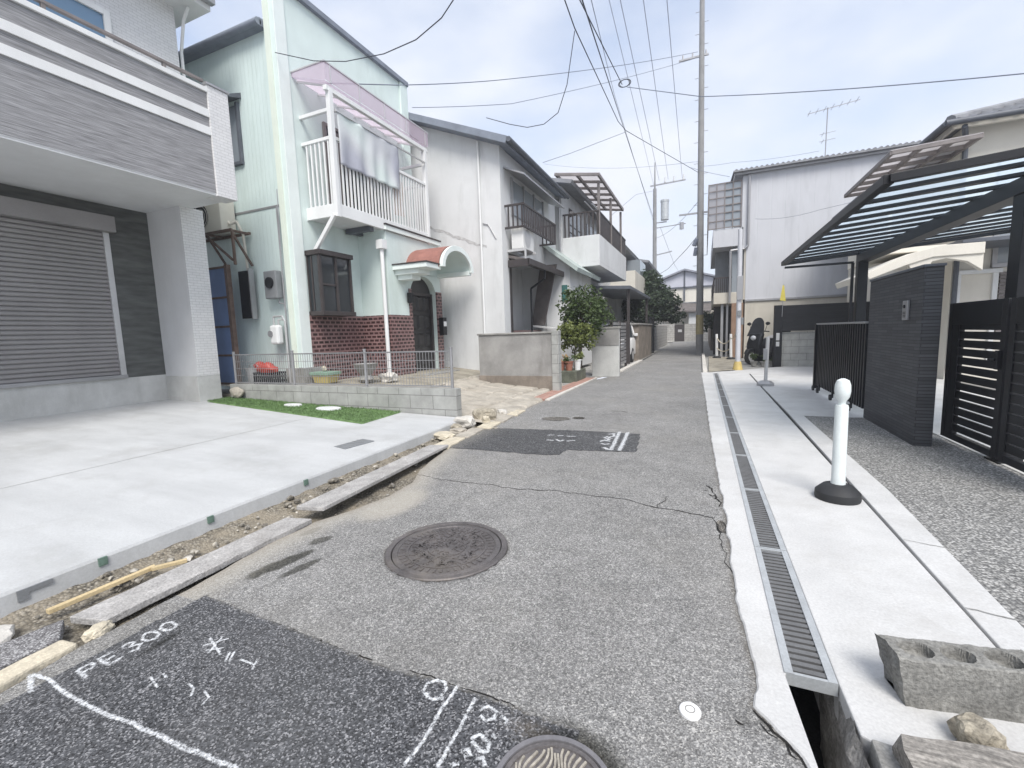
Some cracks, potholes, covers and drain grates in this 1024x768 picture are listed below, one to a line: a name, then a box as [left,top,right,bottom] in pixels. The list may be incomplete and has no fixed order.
manhole cover [384,522,508,582]
drain grate [721,405,735,417]
drain grate [732,454,763,490]
manhole cover [497,735,607,768]
drain grate [724,417,741,433]
drain grate [755,547,838,697]
drain grate [741,488,787,551]
drain grate [727,432,749,455]
crack [417,474,733,573]
